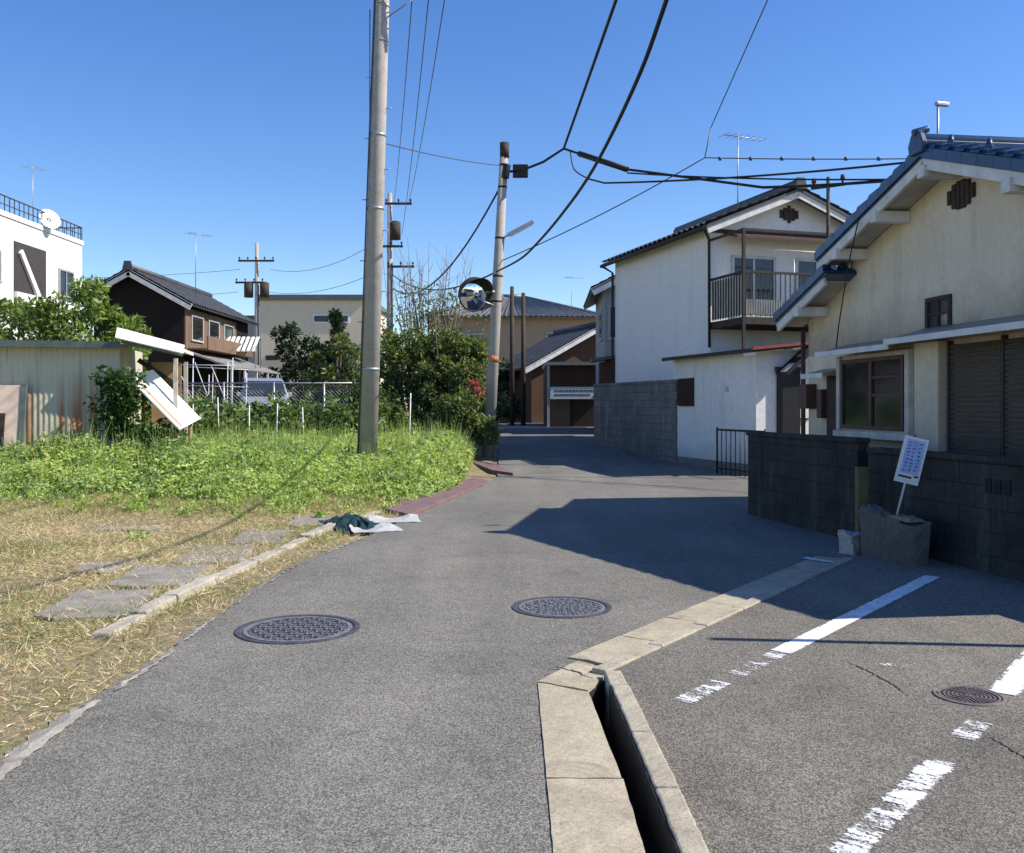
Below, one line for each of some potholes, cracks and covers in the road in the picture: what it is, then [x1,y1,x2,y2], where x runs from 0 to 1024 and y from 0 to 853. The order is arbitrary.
manhole cover [933,685,1007,707]
crack [848,662,907,695]
manhole cover [234,614,360,645]
manhole cover [512,596,612,619]
